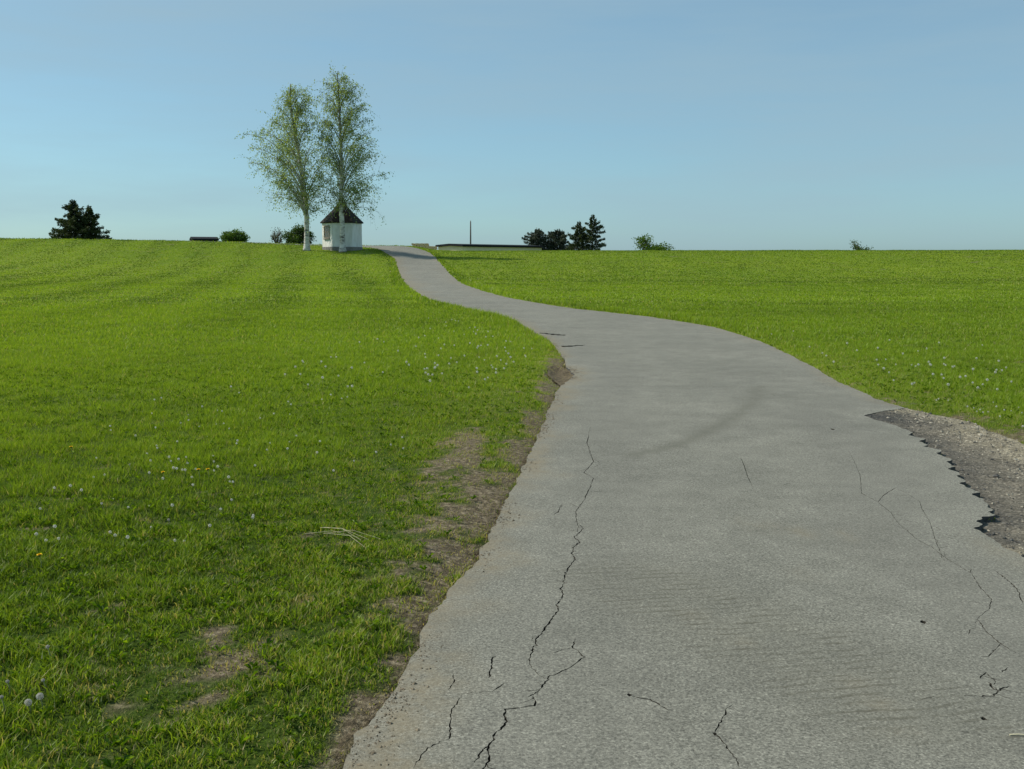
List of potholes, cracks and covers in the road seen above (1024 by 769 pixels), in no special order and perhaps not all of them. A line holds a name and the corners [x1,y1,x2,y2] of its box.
crack [414,434,607,769]
crack [714,703,739,766]
crack [848,451,1023,700]
